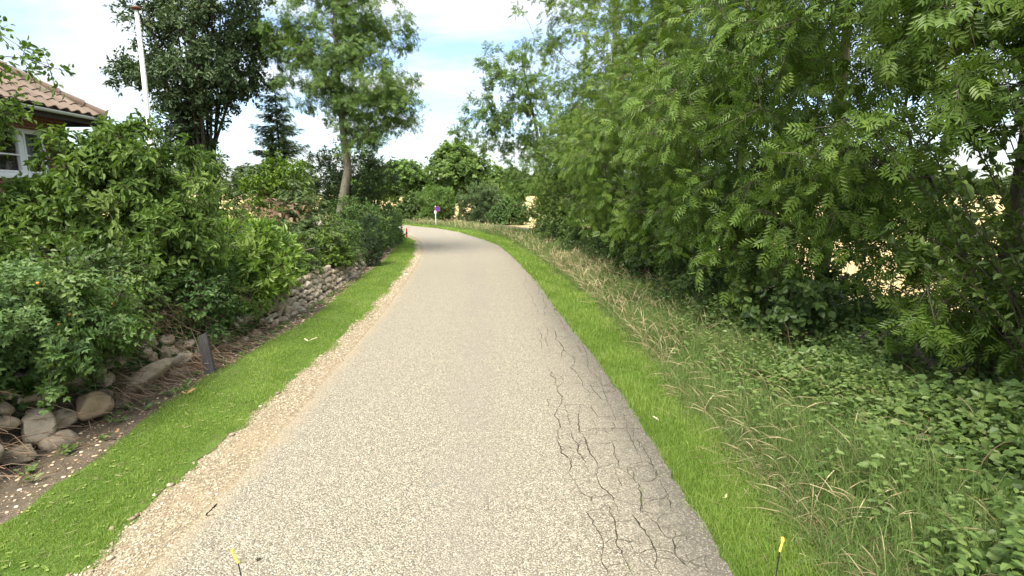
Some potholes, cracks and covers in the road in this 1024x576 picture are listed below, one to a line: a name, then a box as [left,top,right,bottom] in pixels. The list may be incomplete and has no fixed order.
crack [524,277,712,576]
